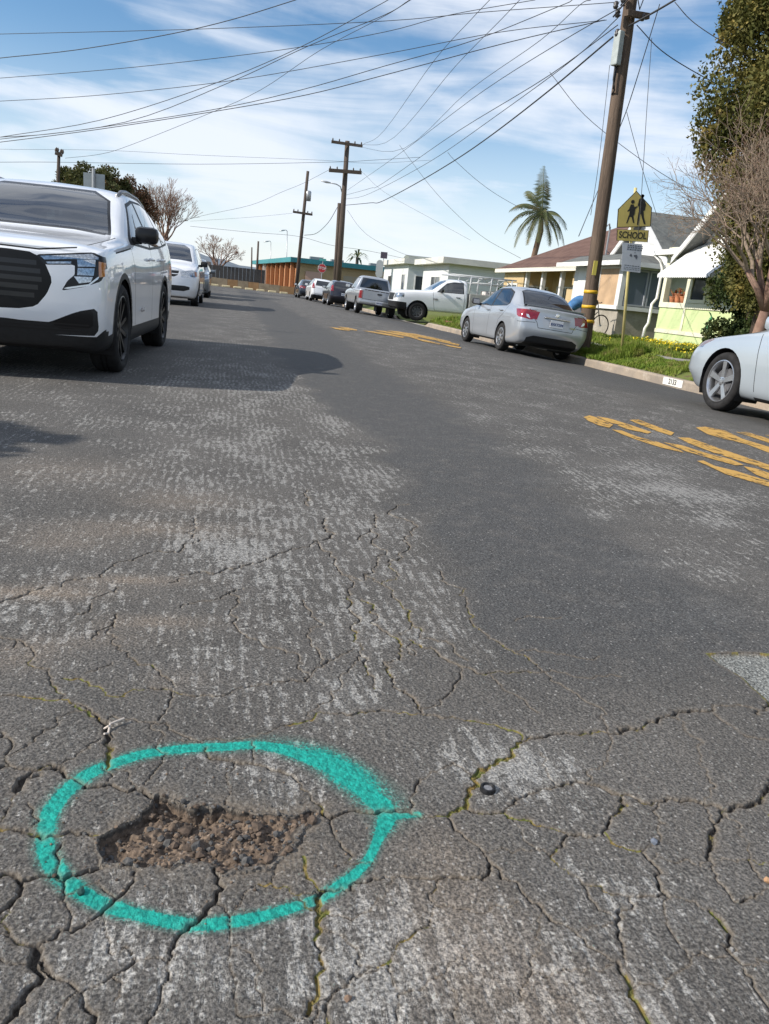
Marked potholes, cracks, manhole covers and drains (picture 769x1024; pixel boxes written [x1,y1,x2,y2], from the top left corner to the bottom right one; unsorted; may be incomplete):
crack [1,520,201,615]
pothole [15,767,371,925]
